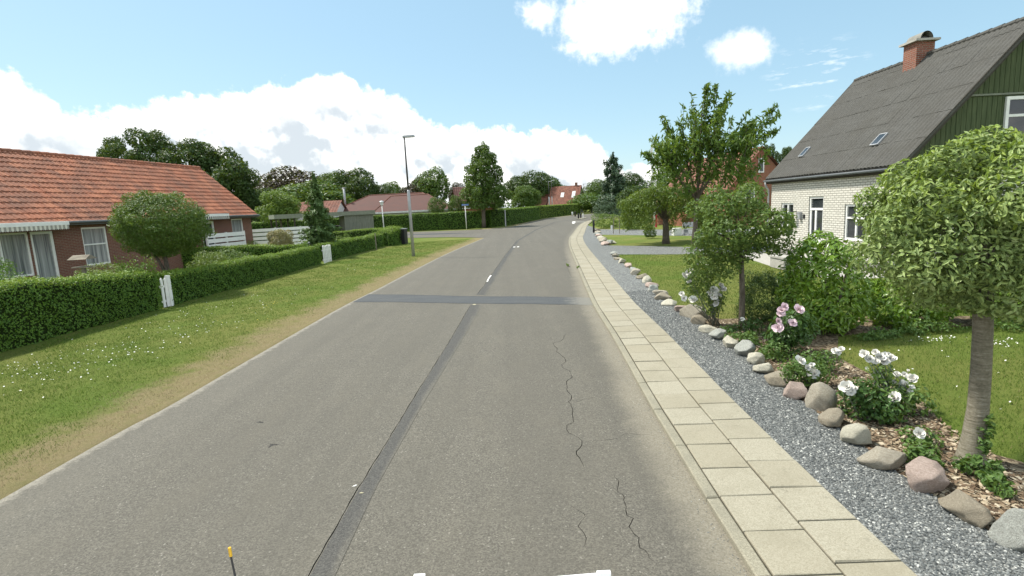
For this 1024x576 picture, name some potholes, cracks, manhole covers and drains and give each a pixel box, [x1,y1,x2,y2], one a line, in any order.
crack [553,339,647,467]
